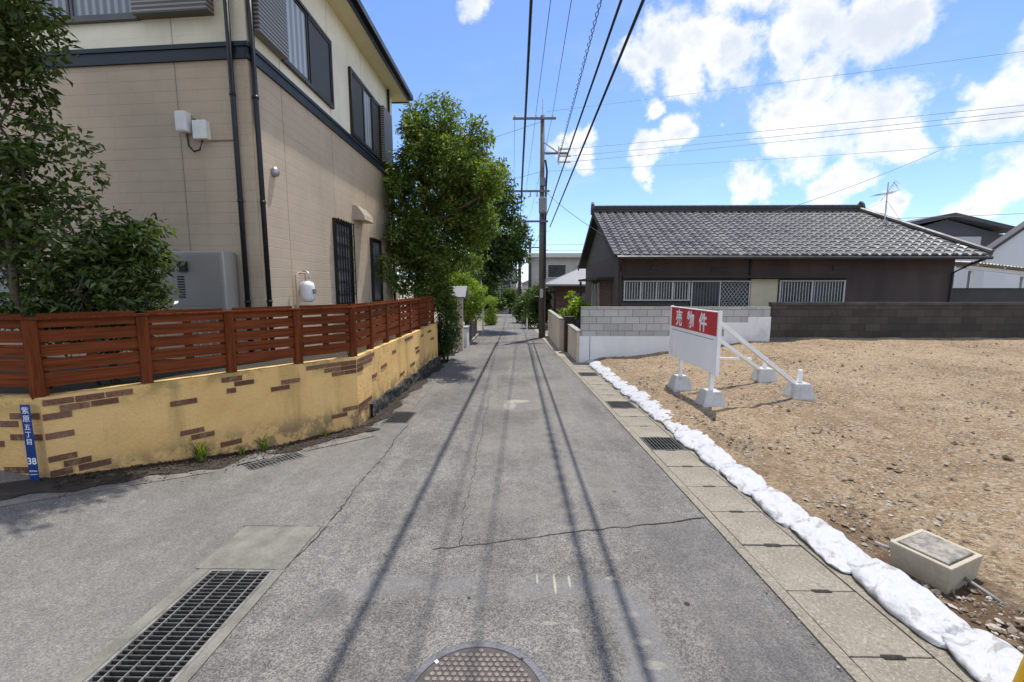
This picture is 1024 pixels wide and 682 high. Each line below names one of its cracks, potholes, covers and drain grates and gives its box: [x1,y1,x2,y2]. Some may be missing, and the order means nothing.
crack [248,425,408,566]
drain grate [83,569,275,682]
drain grate [605,401,636,409]
manhole cover [407,641,548,682]
drain grate [242,451,307,471]
drain grate [383,412,417,423]
drain grate [639,437,686,451]
crack [434,394,706,549]
